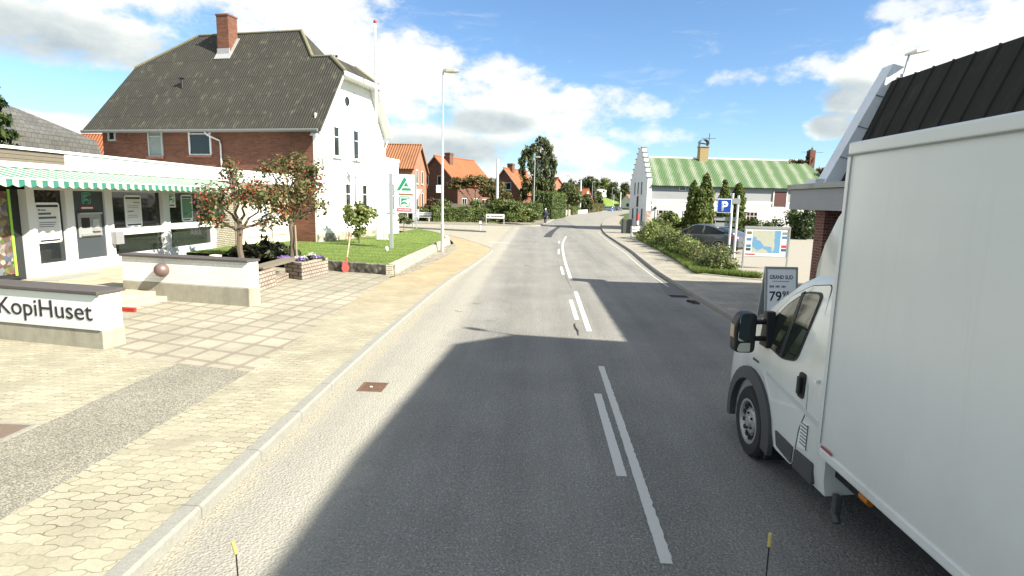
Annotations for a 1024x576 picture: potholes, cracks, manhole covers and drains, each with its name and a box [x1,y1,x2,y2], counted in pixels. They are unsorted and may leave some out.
manhole cover [0,422,38,441]
